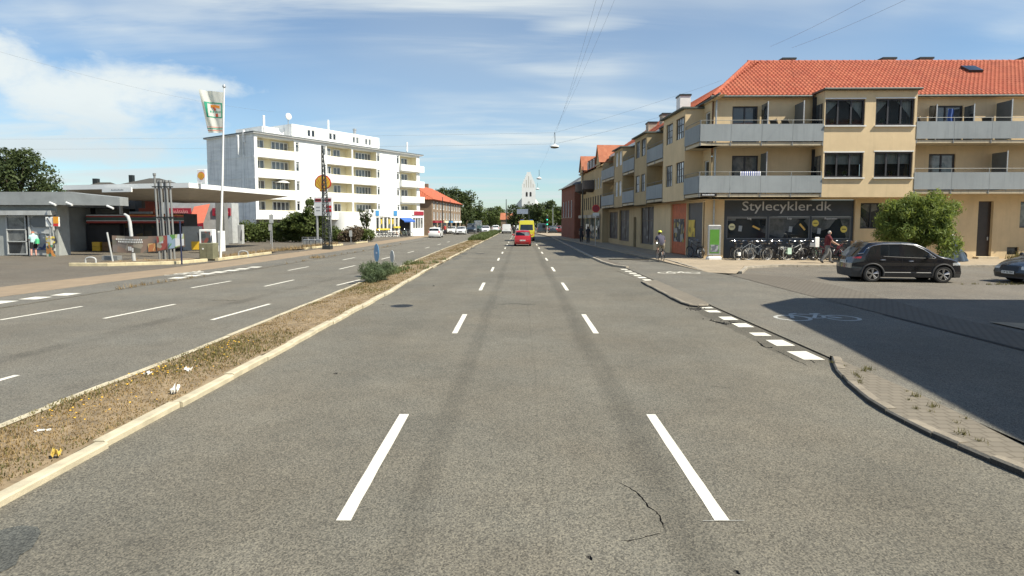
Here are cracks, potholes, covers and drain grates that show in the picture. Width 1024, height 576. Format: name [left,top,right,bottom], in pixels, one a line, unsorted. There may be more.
crack [618,482,666,542]
